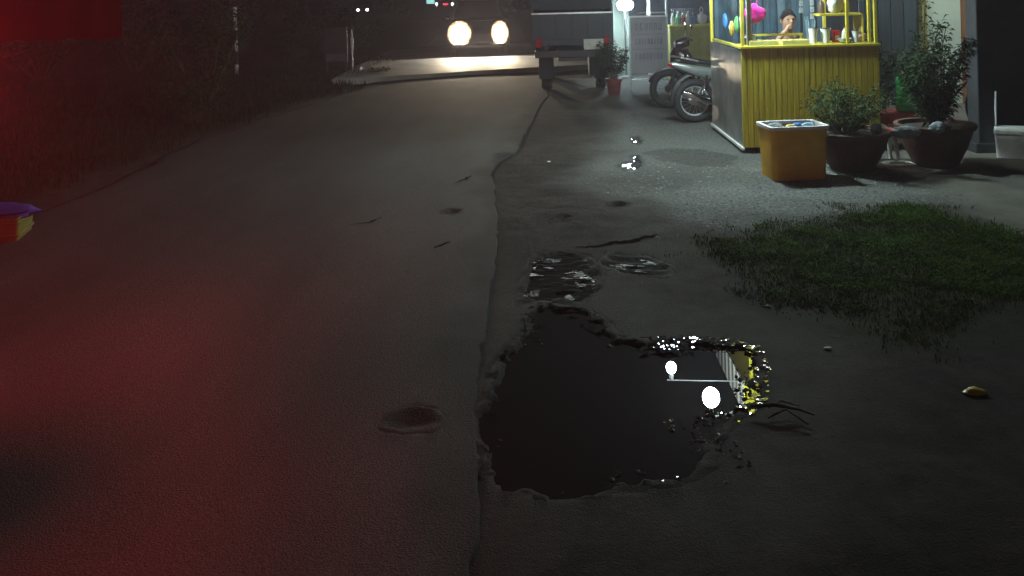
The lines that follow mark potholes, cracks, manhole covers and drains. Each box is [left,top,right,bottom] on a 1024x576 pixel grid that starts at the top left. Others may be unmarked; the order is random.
pothole [614,154,646,170]
crack [578,234,657,248]
pothole [377,405,447,435]
pothole [548,212,579,223]
pothole [473,300,767,502]
